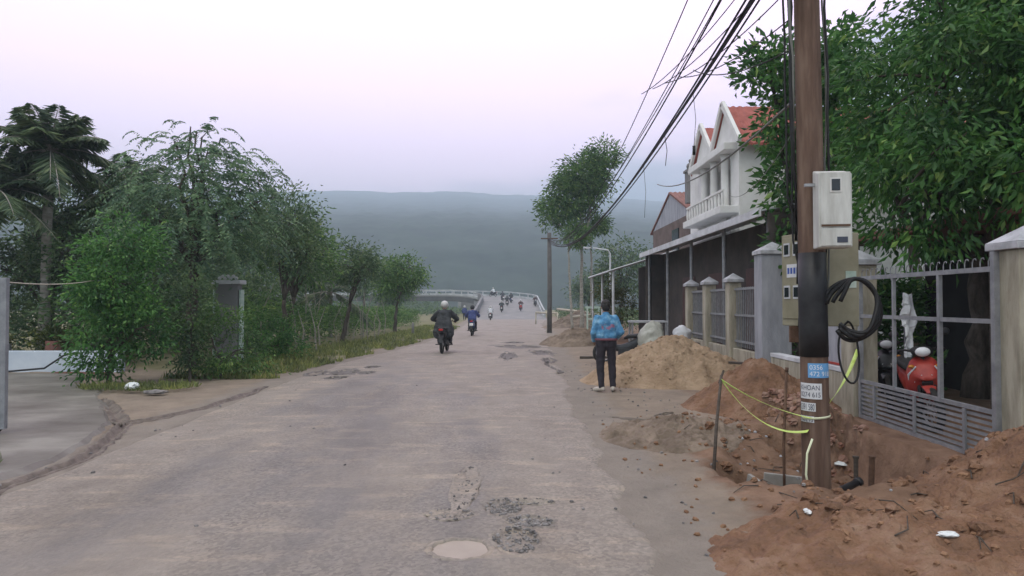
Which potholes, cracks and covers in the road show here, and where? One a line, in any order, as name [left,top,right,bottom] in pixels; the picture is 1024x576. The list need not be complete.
pothole [448,465,483,517]
pothole [488,525,543,557]
pothole [505,514,559,529]
pothole [483,497,522,518]
